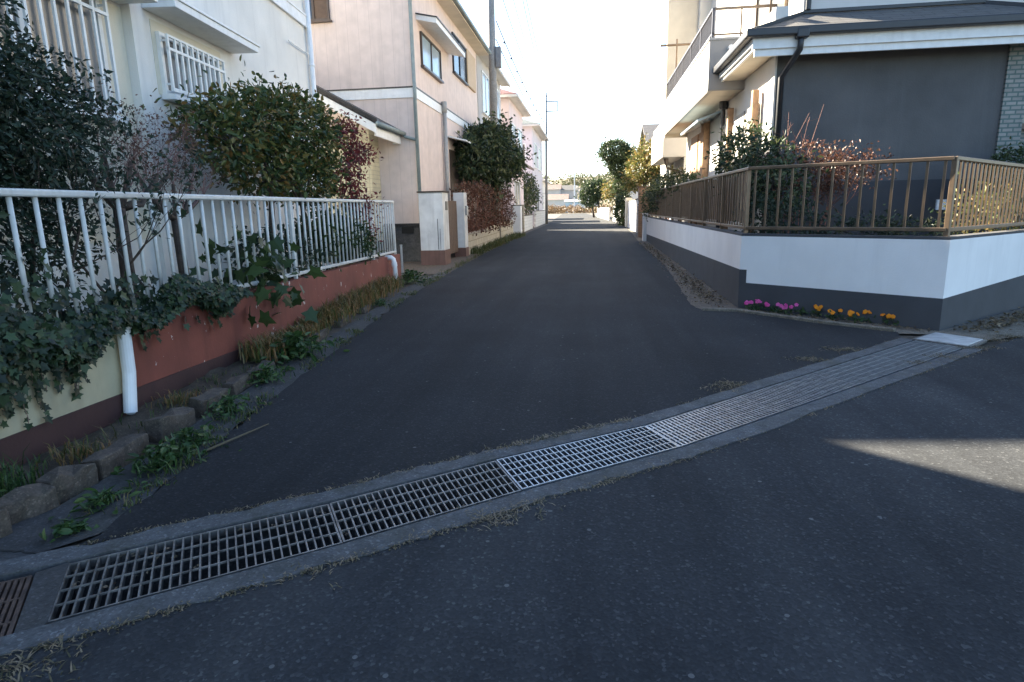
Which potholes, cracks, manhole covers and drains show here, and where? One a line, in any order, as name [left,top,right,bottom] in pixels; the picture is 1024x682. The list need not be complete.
drain grate [738,373,858,413]
drain grate [47,504,343,624]
drain grate [871,340,965,365]
drain grate [0,575,33,637]
drain grate [496,426,679,492]
drain grate [646,397,781,448]
drain grate [330,461,521,544]
drain grate [812,355,918,386]
